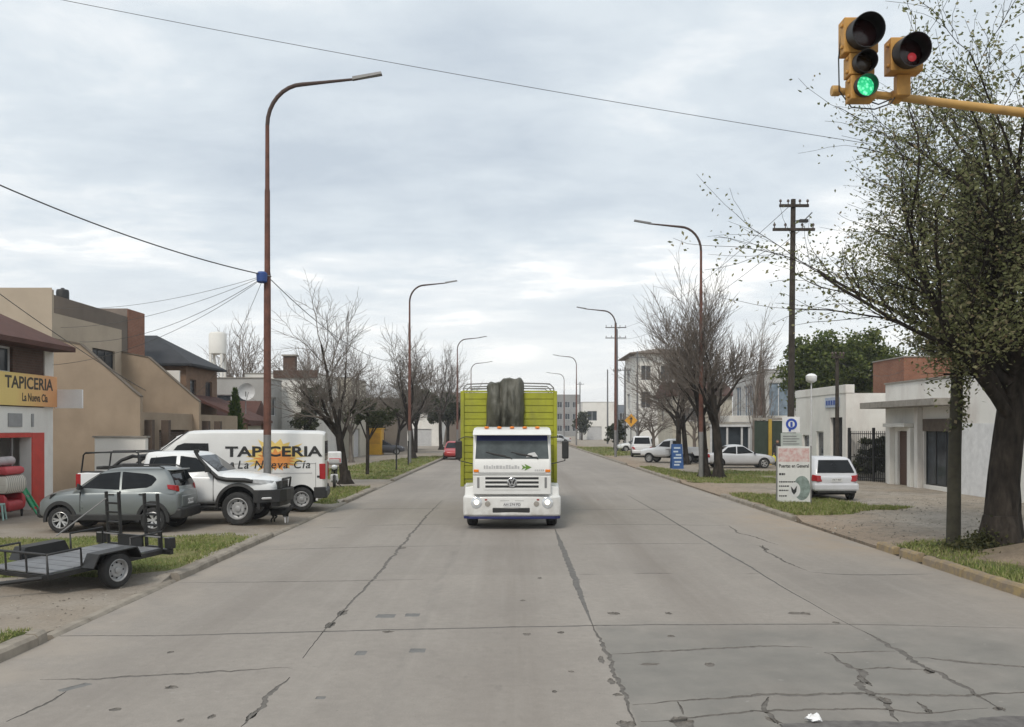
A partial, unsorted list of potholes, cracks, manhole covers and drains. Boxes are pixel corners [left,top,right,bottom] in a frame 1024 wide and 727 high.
crack [593,627,1024,726]
crack [6,667,290,727]
crack [303,504,439,658]
crack [731,527,805,570]
